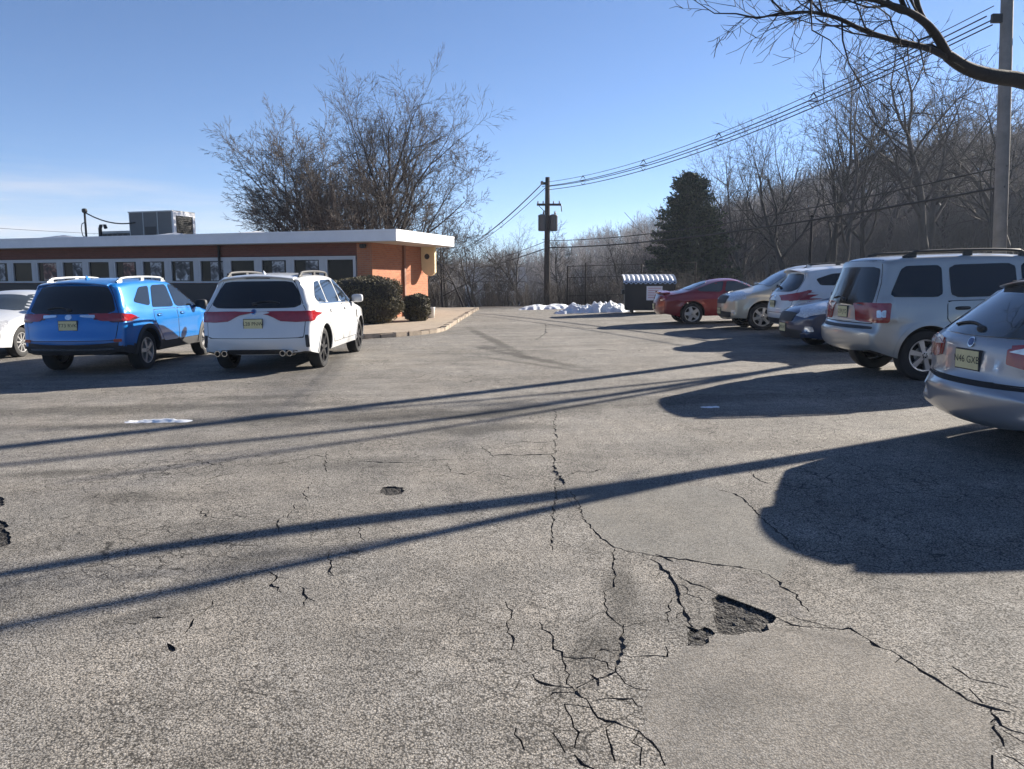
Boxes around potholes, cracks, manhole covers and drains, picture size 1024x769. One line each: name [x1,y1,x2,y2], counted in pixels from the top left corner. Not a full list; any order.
crack [266,452,328,532]
pothole [711,593,776,635]
pothole [0,520,11,547]
pothole [379,486,405,495]
crack [439,409,1024,769]
pothole [686,626,715,646]
crack [268,554,334,611]
